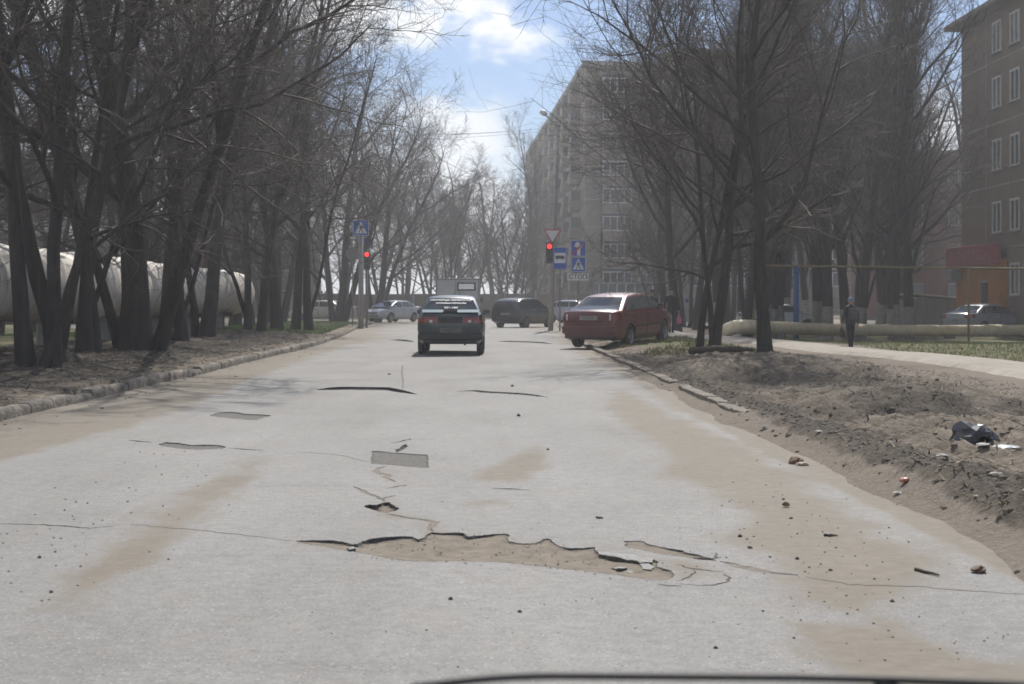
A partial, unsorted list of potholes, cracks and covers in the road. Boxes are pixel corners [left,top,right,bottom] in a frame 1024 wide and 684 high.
crack [131,524,290,541]
crack [659,553,1009,594]
pothole [298,532,674,580]
pothole [364,502,399,513]
crack [308,439,439,531]
pothole [159,442,225,450]
pothole [210,412,271,420]
